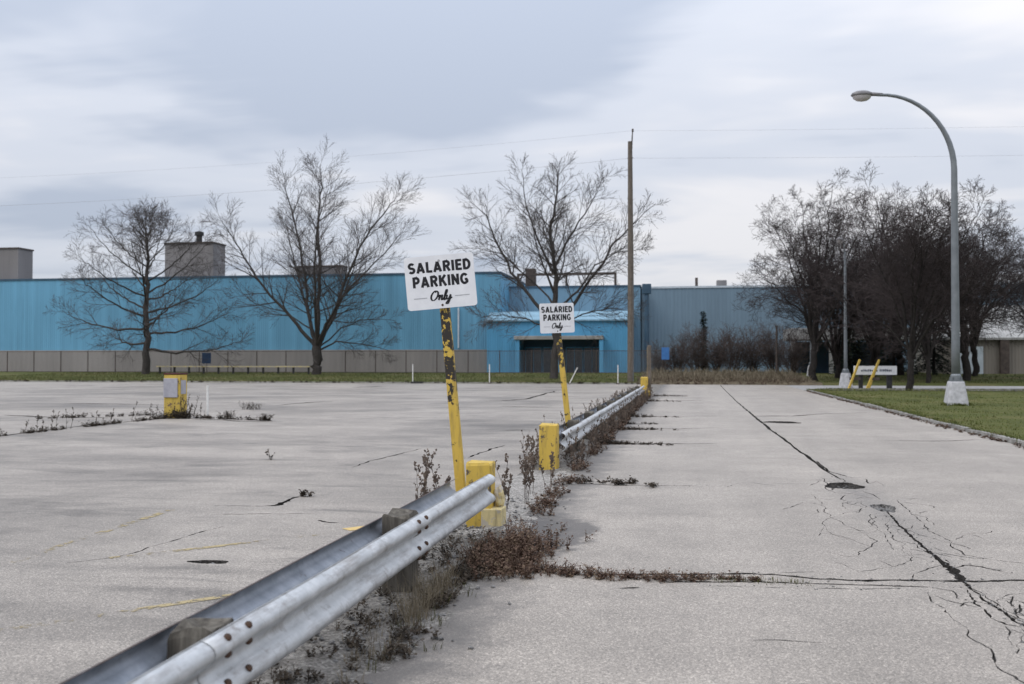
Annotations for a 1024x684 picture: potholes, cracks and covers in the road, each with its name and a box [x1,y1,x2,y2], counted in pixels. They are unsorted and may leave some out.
pothole [826,482,865,490]
pothole [869,504,896,513]
crack [576,385,1024,683]
crack [70,497,337,563]
